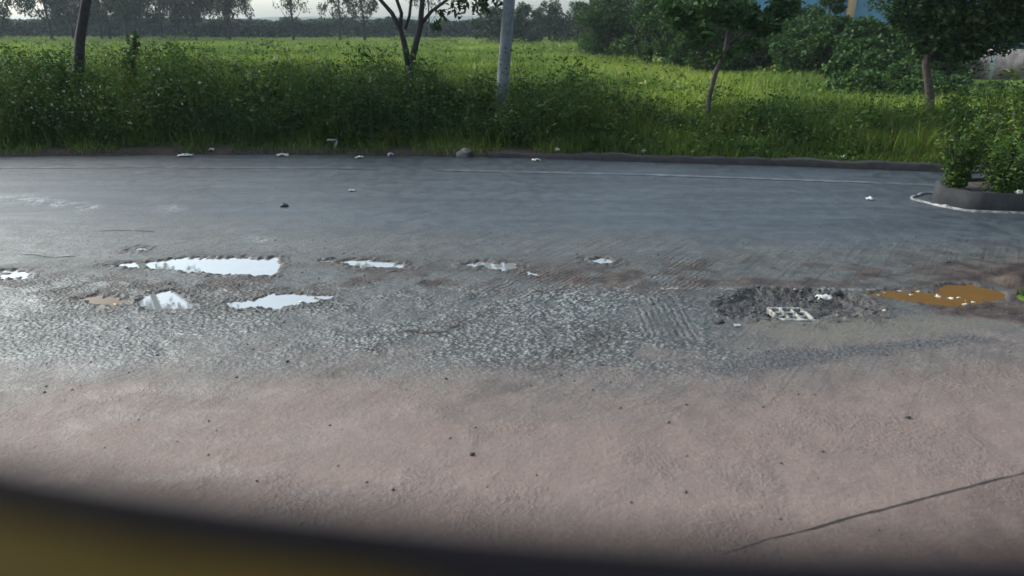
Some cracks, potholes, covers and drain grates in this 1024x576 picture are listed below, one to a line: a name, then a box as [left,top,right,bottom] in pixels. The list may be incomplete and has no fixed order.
pothole [313,256,422,273]
pothole [857,280,1024,311]
drain grate [766,307,816,322]
pothole [116,287,219,314]
pothole [54,290,140,313]
pothole [211,288,344,313]
pothole [87,254,292,279]
pothole [0,267,46,282]
pothole [451,257,533,274]
pothole [704,284,899,326]
